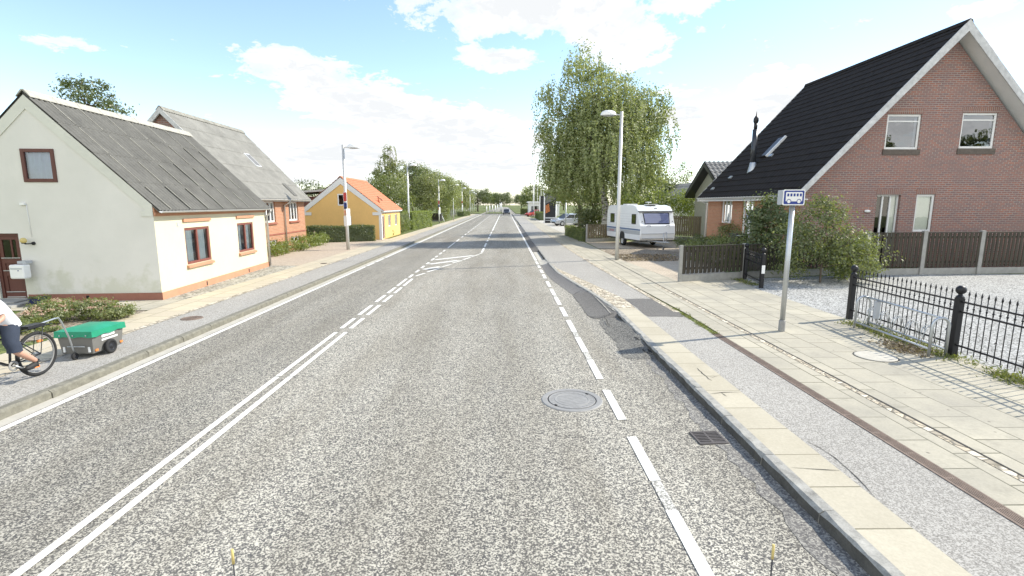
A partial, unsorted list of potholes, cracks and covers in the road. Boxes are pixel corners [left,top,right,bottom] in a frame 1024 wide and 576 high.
manhole cover [853,351,900,362]
drain grate [689,431,729,445]
crack [792,443,874,496]
manhole cover [541,389,603,412]
